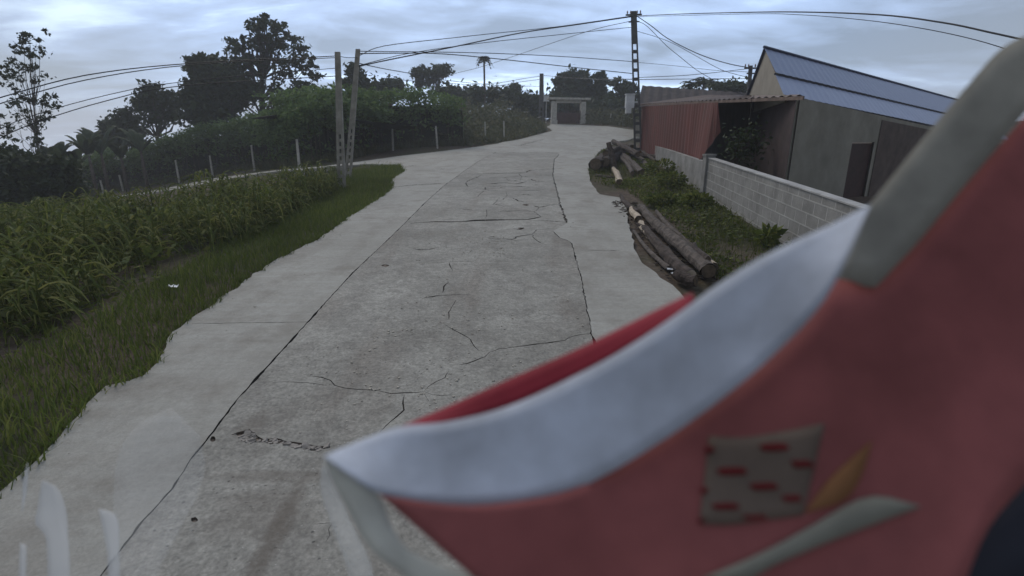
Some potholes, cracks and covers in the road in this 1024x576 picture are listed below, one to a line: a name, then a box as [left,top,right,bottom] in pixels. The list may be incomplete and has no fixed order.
pothole [232,429,330,452]
crack [297,247,583,433]
crack [421,170,560,244]
